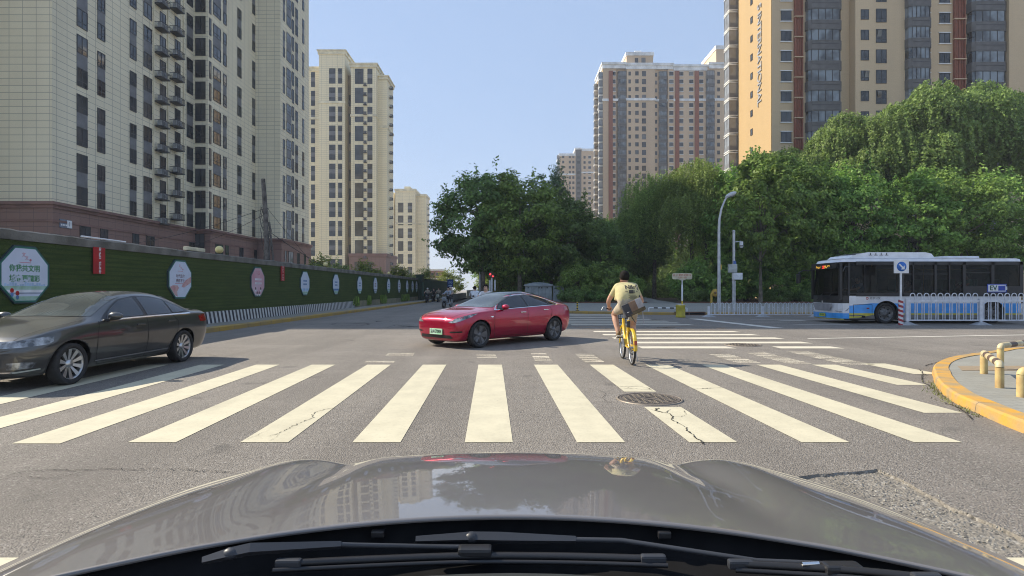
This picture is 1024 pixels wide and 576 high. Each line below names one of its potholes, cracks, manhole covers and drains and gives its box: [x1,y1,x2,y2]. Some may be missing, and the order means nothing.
manhole cover [616,393,683,406]
